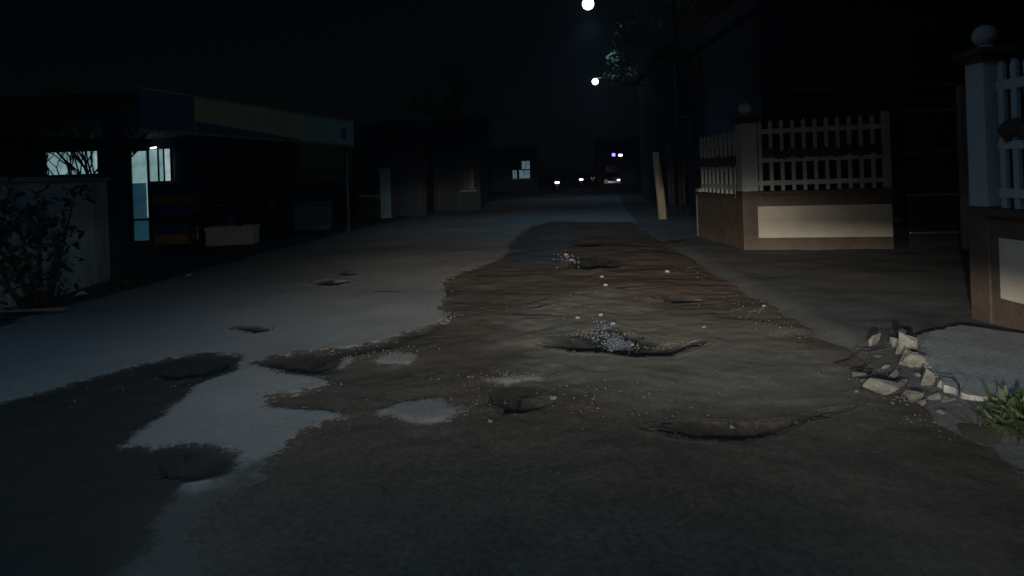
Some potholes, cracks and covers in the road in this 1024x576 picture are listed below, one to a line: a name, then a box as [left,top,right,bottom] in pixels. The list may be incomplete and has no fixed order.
pothole [632,401,871,447]
pothole [222,323,280,335]
pothole [476,382,560,418]
pothole [143,351,247,383]
pothole [250,349,342,376]
pothole [306,278,362,287]
pothole [555,254,636,271]
pothole [138,441,247,488]
crack [833,346,887,369]
pothole [524,323,721,359]
